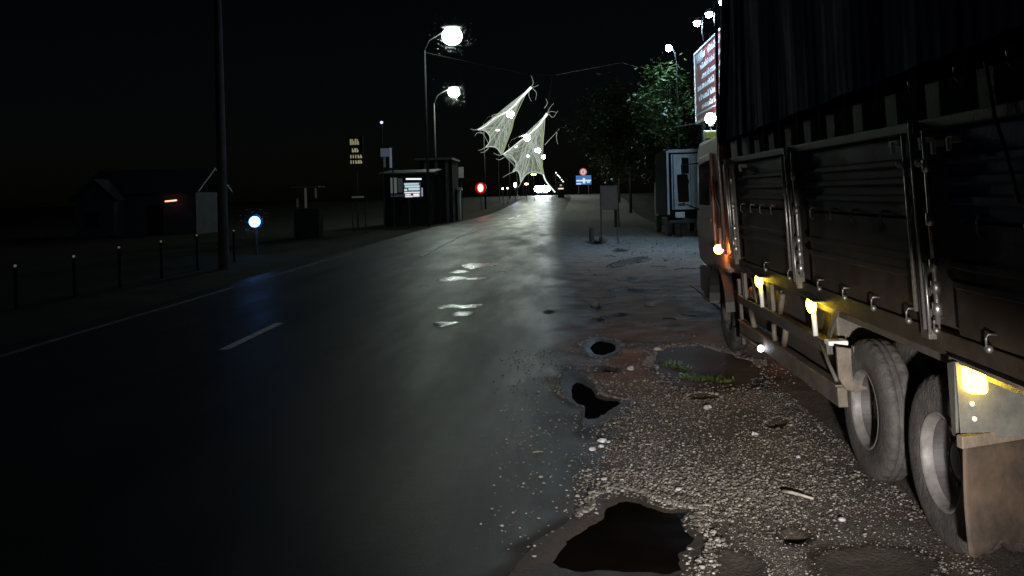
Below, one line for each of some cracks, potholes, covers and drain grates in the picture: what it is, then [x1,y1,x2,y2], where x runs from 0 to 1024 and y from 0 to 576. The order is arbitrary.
pothole [508,490,707,576]
pothole [776,528,811,545]
pothole [581,337,621,357]
pothole [654,346,763,387]
pothole [560,369,630,428]
pothole [612,257,645,266]
